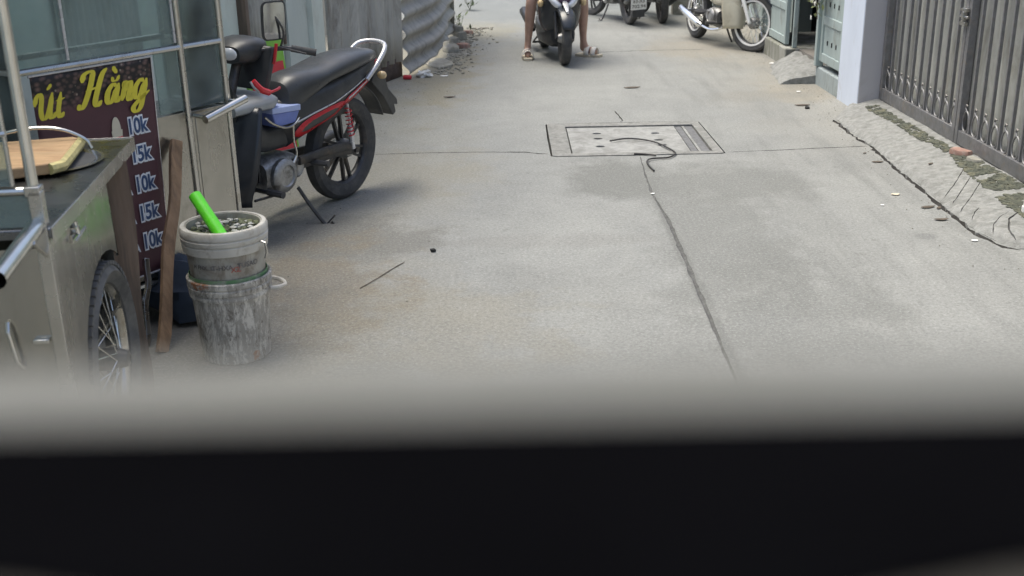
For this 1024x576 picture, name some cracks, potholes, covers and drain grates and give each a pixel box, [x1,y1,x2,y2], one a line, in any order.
manhole cover [546,121,725,157]
